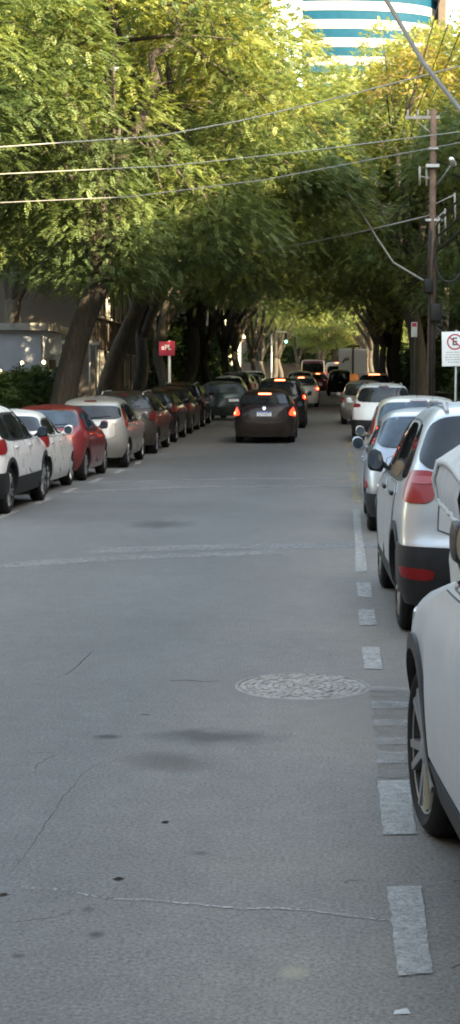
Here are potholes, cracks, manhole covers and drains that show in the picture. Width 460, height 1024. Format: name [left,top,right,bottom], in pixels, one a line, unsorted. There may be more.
manhole cover [235,673,371,700]
crack [3,760,389,923]
